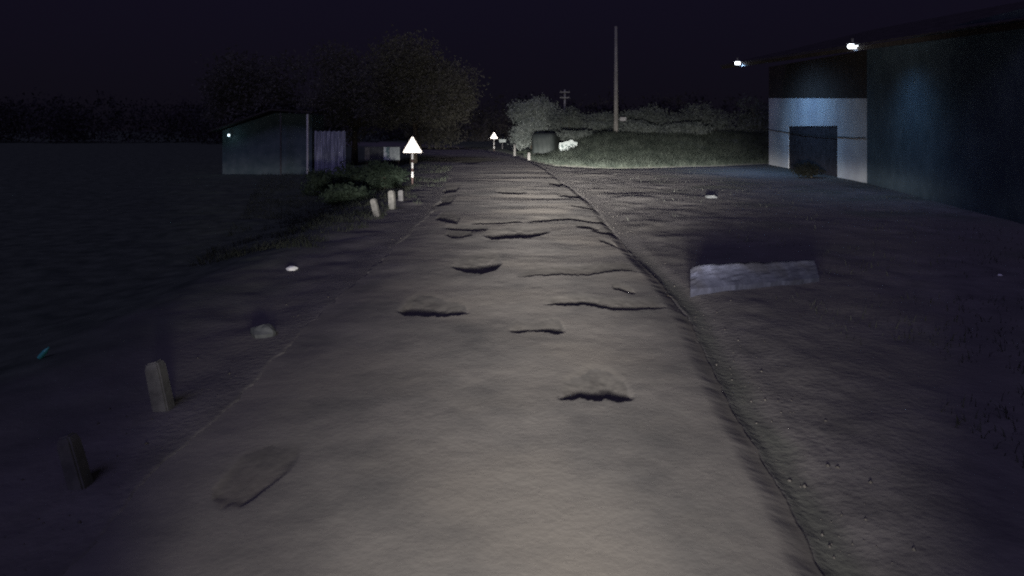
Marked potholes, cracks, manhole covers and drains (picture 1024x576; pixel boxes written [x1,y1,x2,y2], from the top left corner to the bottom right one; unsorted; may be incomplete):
pothole [509,319,565,334]
pothole [445,224,489,232]
pothole [438,195,455,207]
pothole [435,212,460,224]
pothole [445,230,474,238]
pothole [484,226,550,240]
pothole [559,368,633,402]
pothole [399,295,467,317]
pothole [453,251,502,274]
